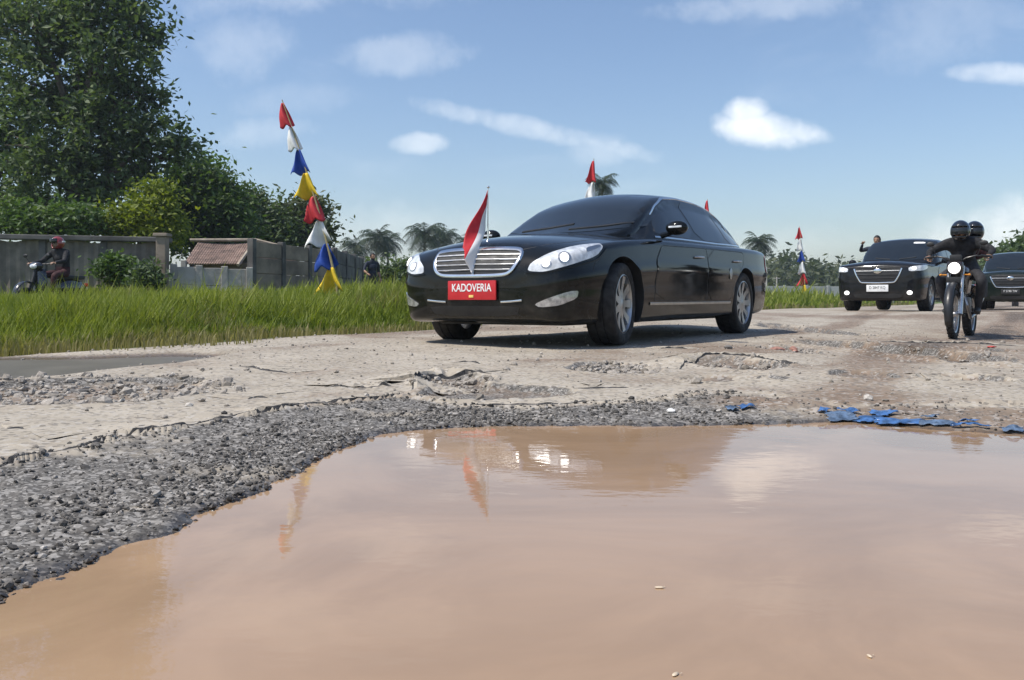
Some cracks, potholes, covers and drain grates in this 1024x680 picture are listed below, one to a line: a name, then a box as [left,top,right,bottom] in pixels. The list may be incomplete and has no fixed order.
pothole [416,380,585,400]
pothole [0,391,1024,601]
crack [0,346,827,467]
pothole [413,372,498,396]
pothole [692,354,797,370]
pothole [564,361,664,374]
